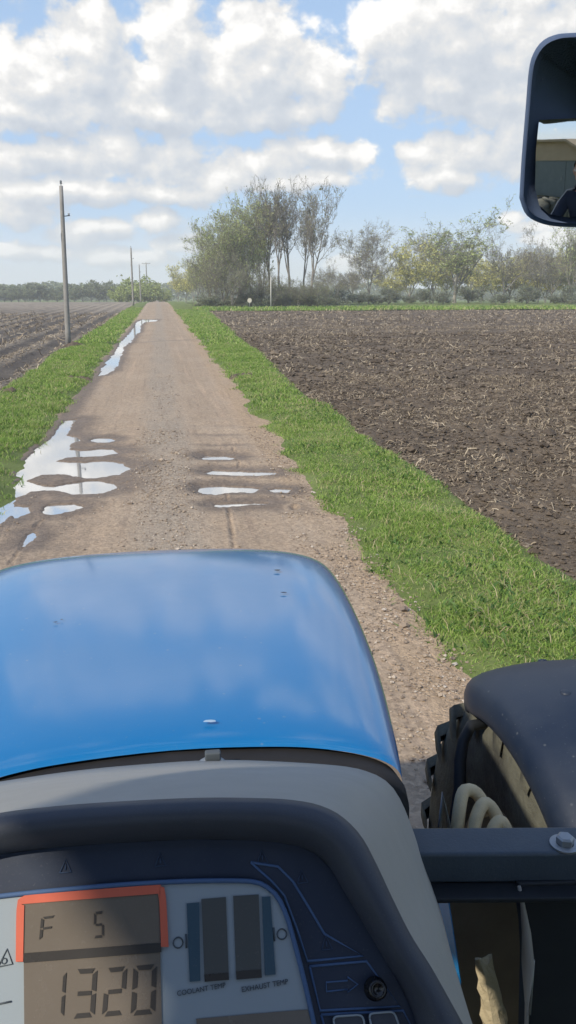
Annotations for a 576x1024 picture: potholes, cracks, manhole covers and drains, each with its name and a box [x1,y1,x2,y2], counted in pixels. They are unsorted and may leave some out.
pothole [187,481,269,495]
pothole [192,450,247,461]
pothole [0,417,141,526]
pothole [195,465,288,476]
pothole [261,485,304,495]
pothole [94,319,160,376]
pothole [197,497,284,511]
crack [225,493,239,549]
